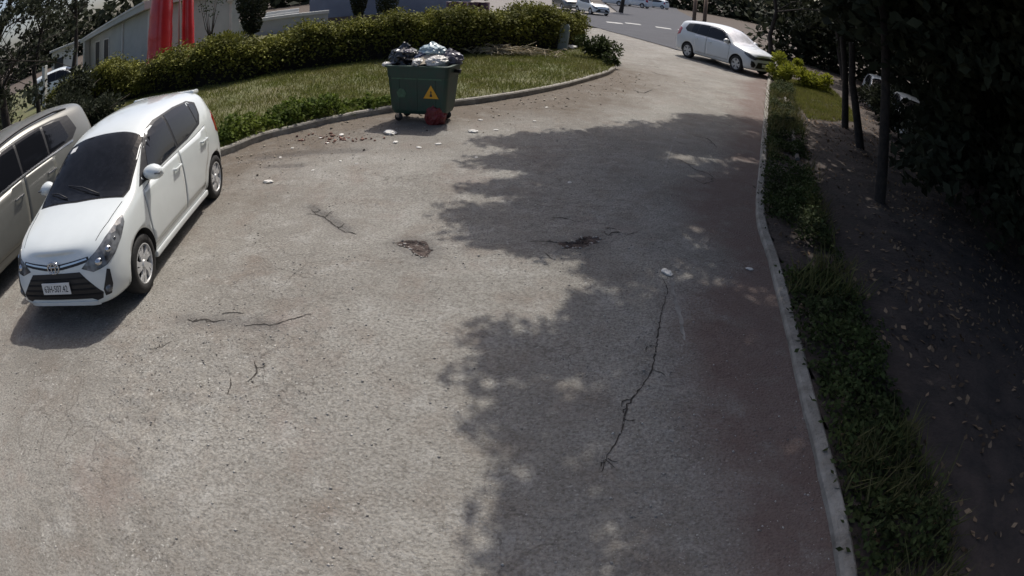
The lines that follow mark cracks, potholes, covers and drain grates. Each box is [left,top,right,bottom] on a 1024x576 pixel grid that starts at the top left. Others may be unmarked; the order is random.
crack [188,312,307,326]
crack [227,361,265,394]
crack [311,209,355,234]
crack [600,278,668,472]
pothole [554,236,602,249]
pothole [393,239,432,258]
